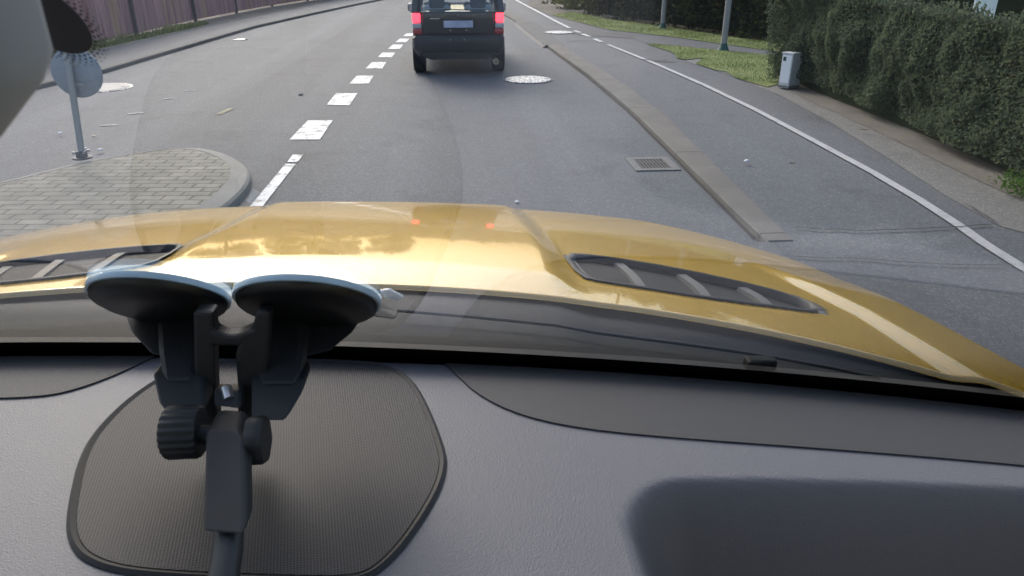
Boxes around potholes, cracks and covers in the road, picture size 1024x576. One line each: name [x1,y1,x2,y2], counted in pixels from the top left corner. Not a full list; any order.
manhole cover [503,76,553,84]
drain grate [625,157,681,172]
manhole cover [97,83,133,93]
crack [799,256,1000,265]
